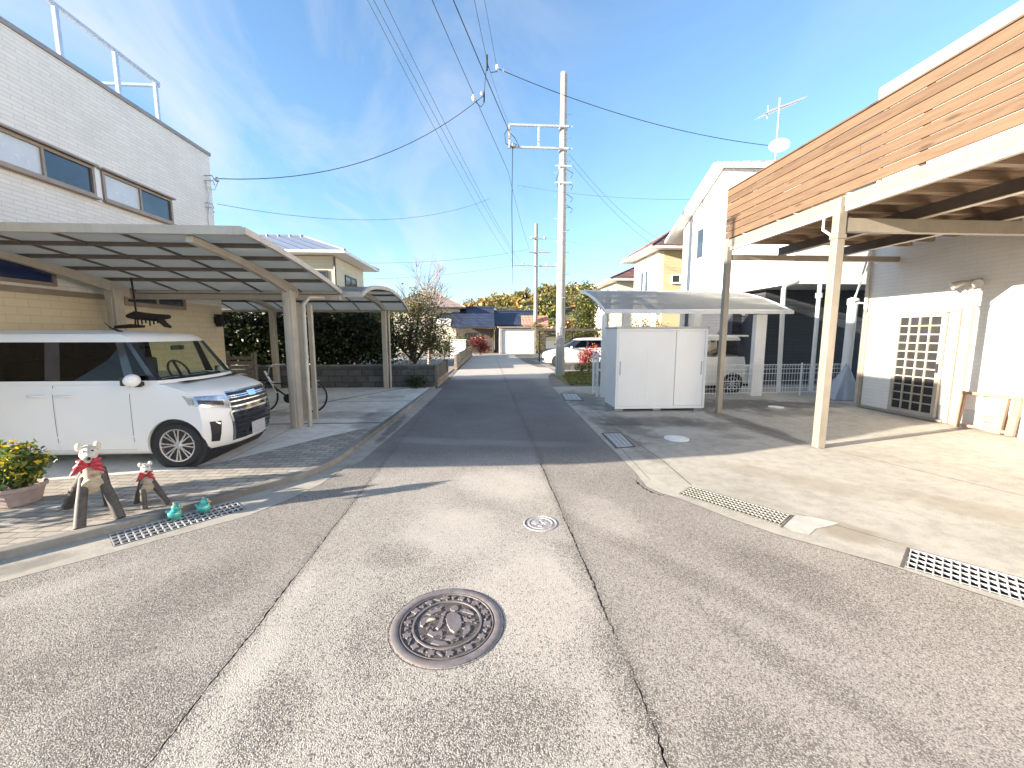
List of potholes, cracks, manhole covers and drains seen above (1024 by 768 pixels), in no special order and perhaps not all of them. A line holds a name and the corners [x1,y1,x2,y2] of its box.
manhole cover [523,515,558,531]
manhole cover [388,588,505,670]
crack [145,480,370,768]
crack [631,667,668,768]
drain grate [679,486,790,525]
drain grate [905,548,1024,602]
crack [540,464,618,640]
drain grate [108,500,246,547]
